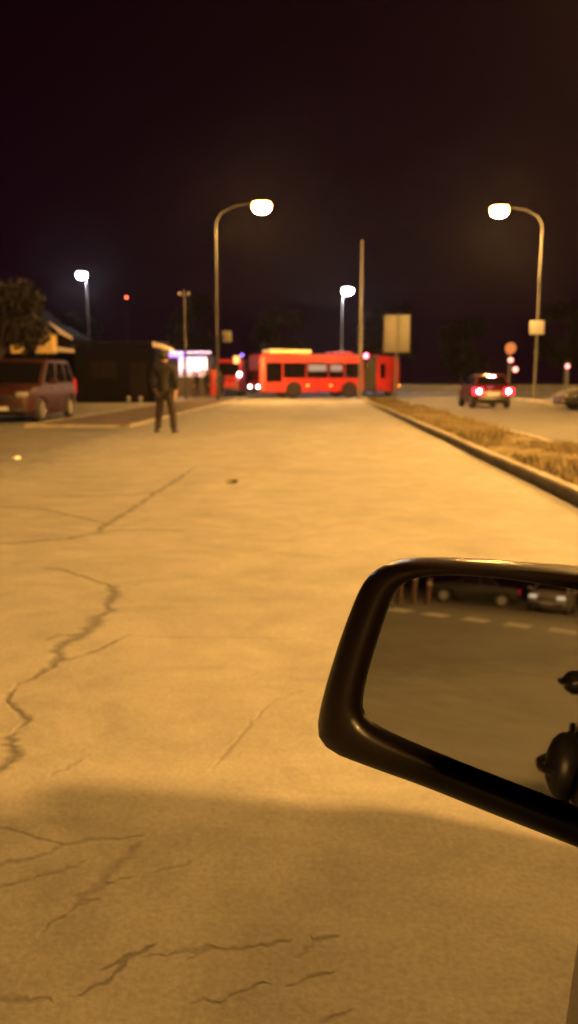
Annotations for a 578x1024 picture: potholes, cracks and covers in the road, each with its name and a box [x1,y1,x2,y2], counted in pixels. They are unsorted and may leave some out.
crack [0,456,219,544]
crack [0,568,293,778]
crack [0,827,342,1008]
crack [209,689,309,772]
